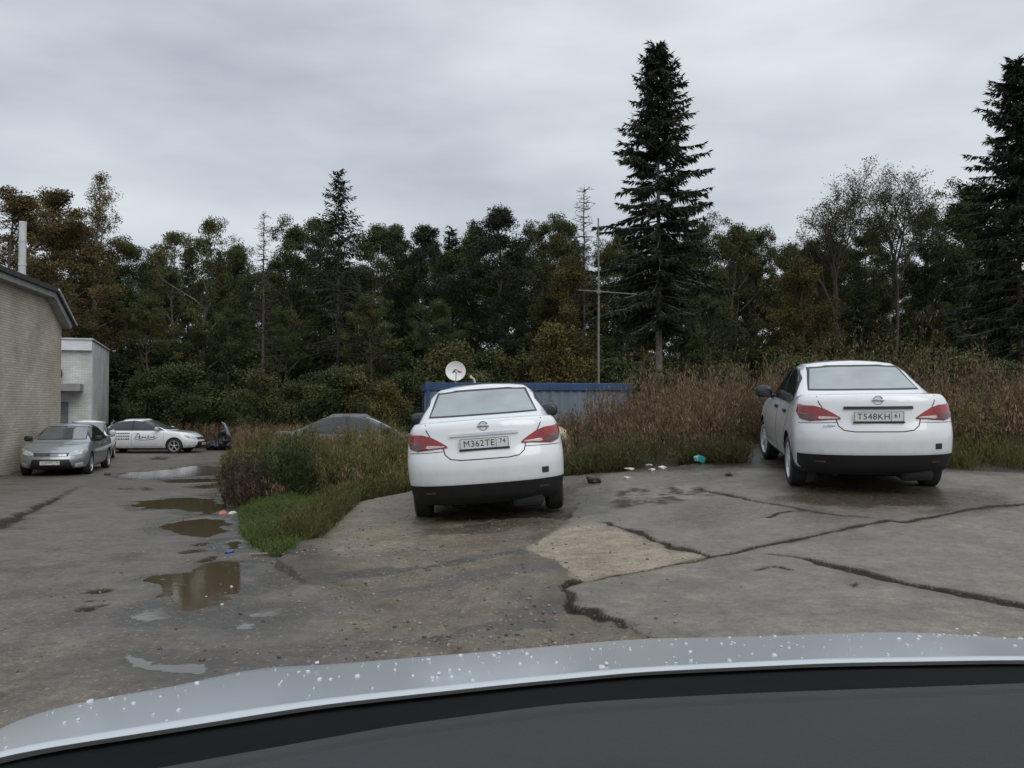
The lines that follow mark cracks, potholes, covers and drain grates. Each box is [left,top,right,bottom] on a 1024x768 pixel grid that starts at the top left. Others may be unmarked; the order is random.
crack [558,487,1024,636]
